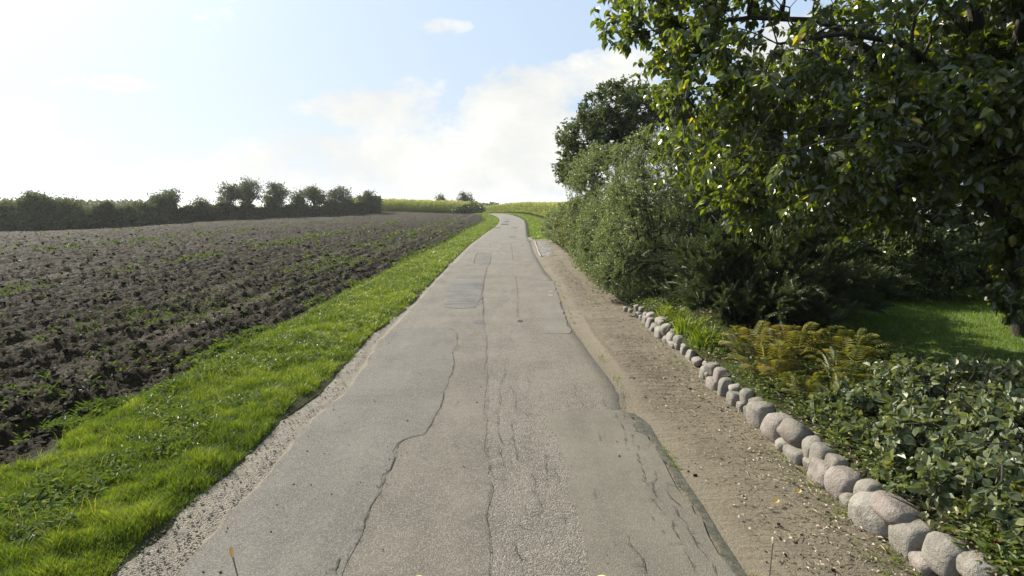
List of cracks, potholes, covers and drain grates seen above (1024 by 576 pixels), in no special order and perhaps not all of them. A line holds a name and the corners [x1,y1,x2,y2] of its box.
crack [492,356,529,486]
crack [326,333,479,572]
crack [506,455,558,573]
crack [574,383,715,572]
